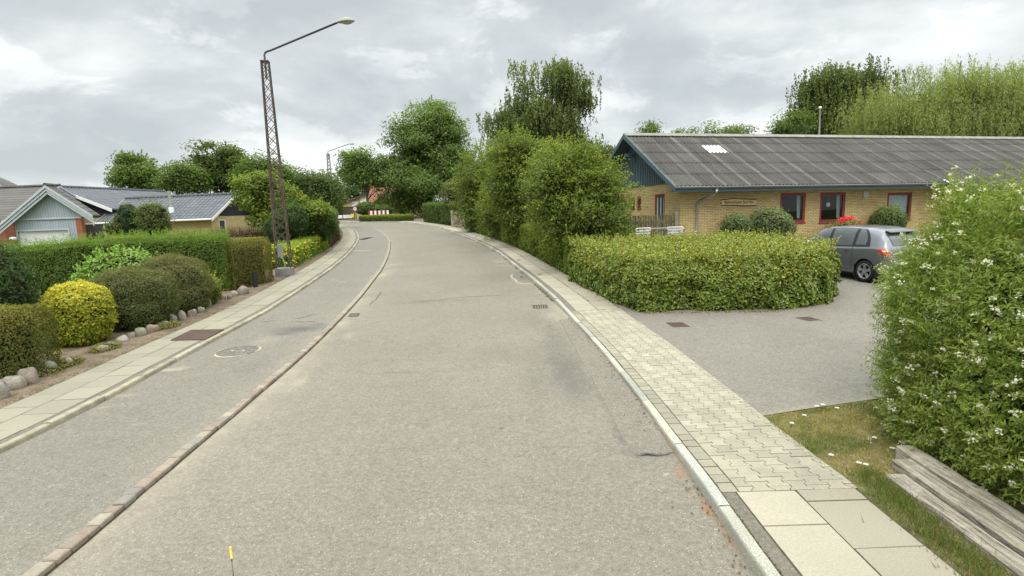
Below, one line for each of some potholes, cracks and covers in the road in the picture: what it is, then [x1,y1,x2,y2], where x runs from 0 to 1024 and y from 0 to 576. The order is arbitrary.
manhole cover [214,345,261,357]
manhole cover [171,329,224,341]
